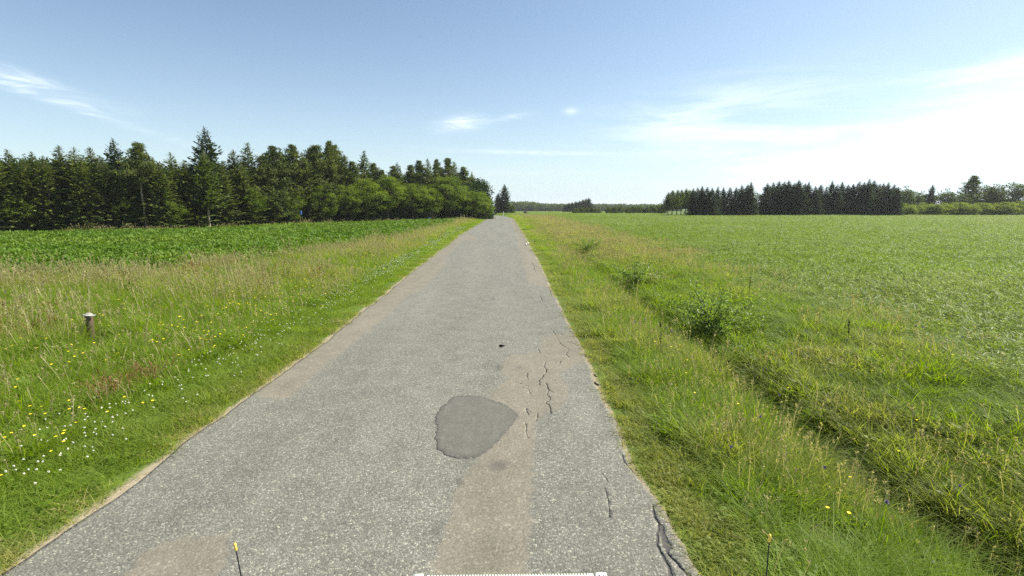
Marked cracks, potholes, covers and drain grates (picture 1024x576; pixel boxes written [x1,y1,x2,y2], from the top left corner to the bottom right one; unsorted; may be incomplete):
crack [652,507,690,576]
